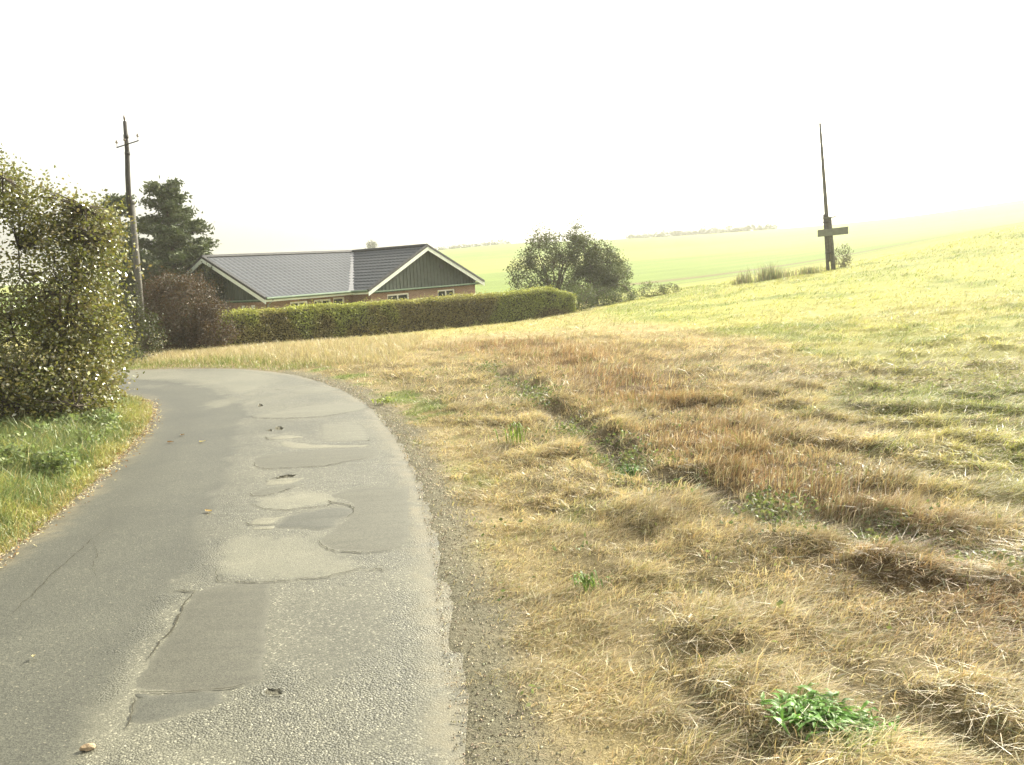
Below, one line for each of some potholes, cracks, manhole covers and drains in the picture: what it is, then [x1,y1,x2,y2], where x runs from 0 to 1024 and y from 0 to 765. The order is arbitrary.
crack [149,590,195,657]
pothole [259,687,287,698]
crack [14,526,110,612]
